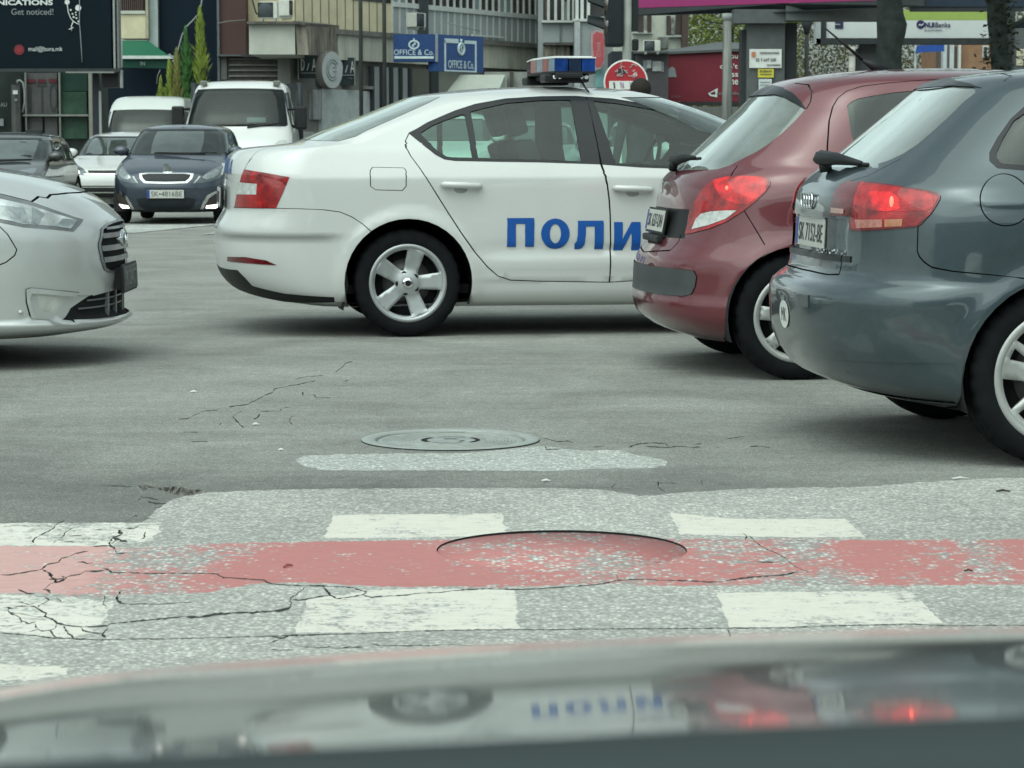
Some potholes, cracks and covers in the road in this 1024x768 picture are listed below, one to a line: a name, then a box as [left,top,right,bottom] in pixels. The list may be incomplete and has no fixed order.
crack [3,485,807,646]
manhole cover [361,428,540,451]
crack [182,361,353,442]
crack [544,436,771,450]
